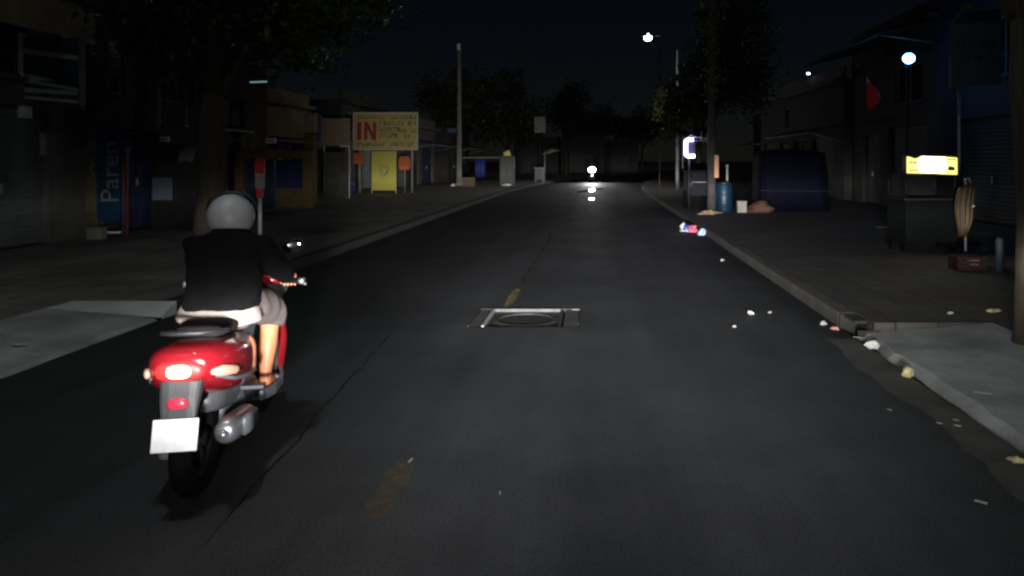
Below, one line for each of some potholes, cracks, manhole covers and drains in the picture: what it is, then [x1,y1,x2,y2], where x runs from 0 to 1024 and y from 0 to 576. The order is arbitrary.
crack [519,233,552,285]
manhole cover [467,308,580,327]
